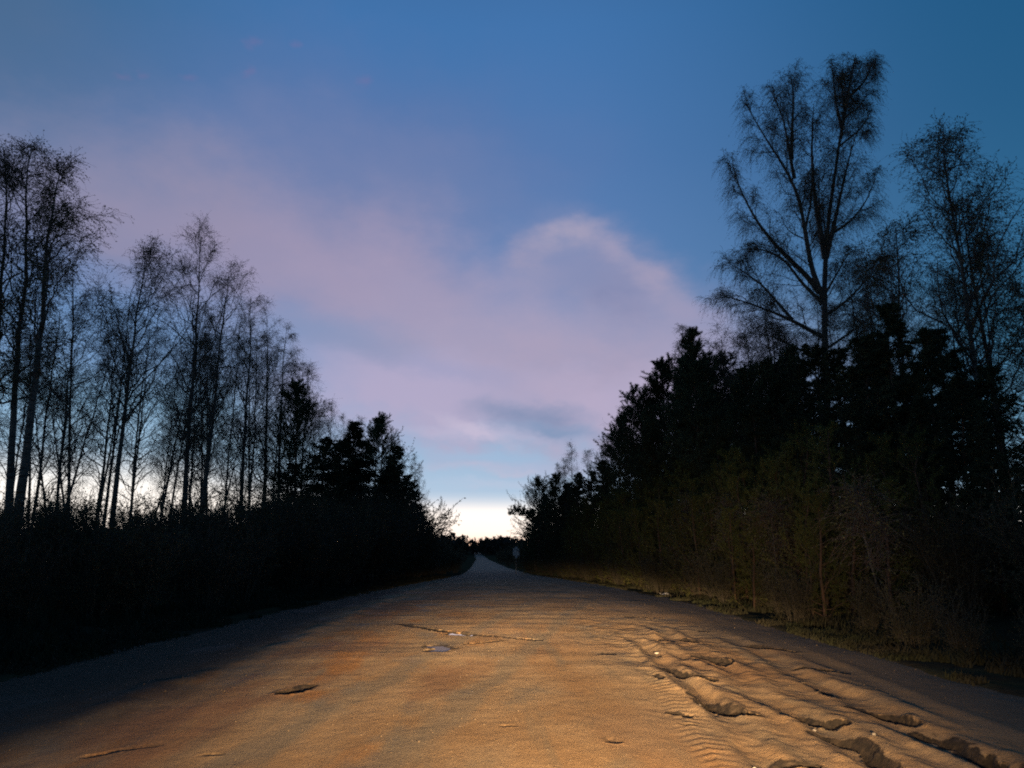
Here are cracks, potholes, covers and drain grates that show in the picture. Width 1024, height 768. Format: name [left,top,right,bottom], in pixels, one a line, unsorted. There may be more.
pothole [662,710,696,719]
pothole [675,672,723,682]
pothole [655,666,689,679]
pothole [791,716,857,733]
pothole [270,684,321,695]
crack [396,624,546,644]
pothole [800,727,910,768]
pothole [905,730,1024,768]
pothole [841,705,932,729]
